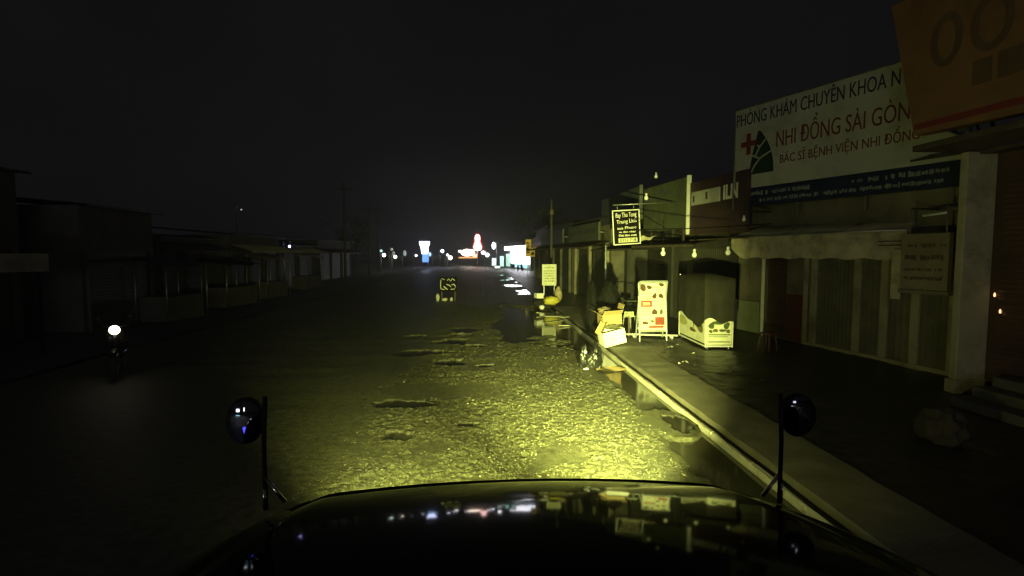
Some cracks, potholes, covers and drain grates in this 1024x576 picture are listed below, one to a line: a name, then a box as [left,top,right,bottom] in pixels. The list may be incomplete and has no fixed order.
pothole [428,358,468,366]
pothole [370,399,441,408]
pothole [660,414,699,434]
pothole [390,349,457,357]
pothole [379,429,416,441]
